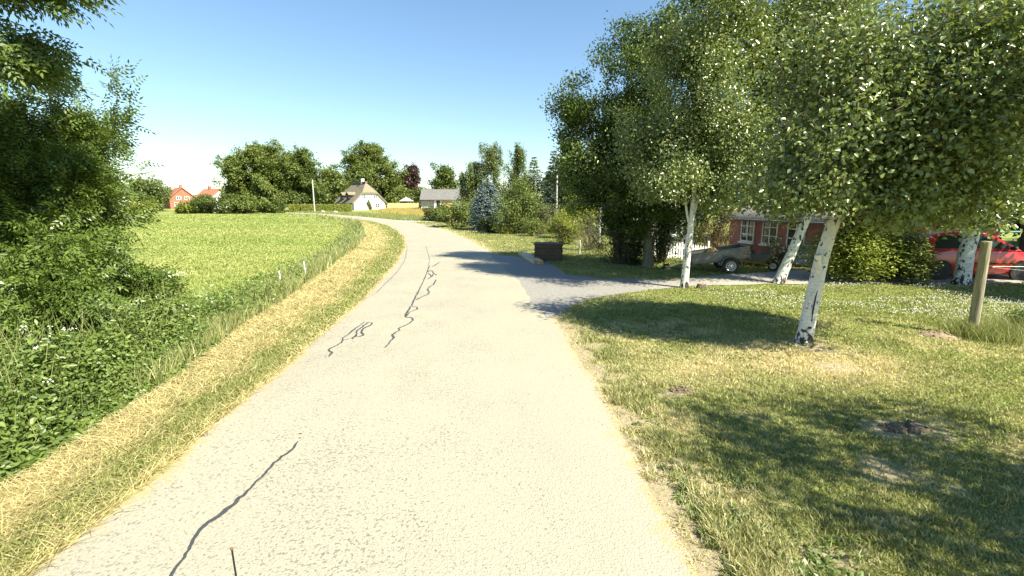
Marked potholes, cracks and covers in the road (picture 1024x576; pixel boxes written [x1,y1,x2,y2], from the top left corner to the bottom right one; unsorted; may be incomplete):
crack [325,248,440,357]
